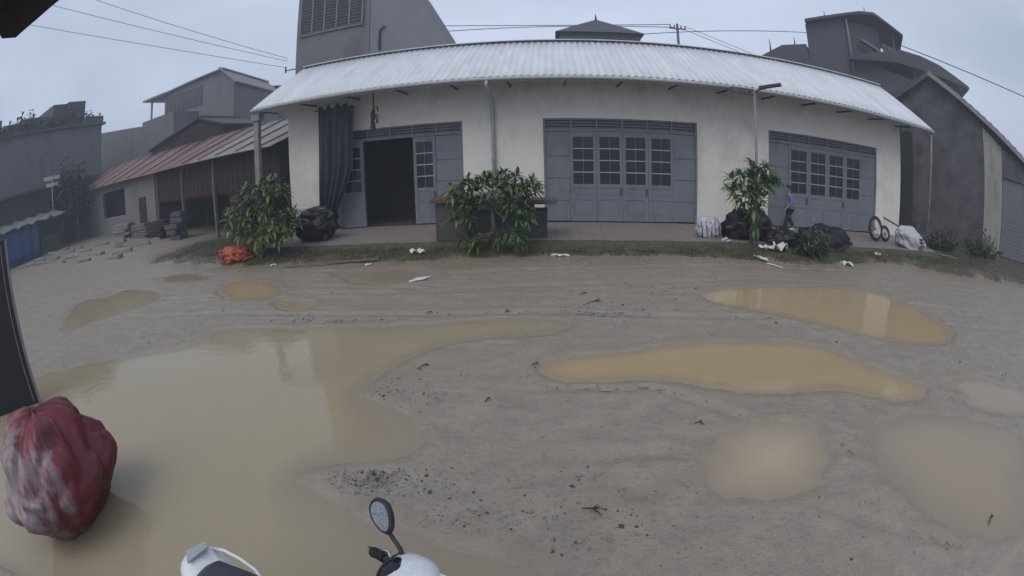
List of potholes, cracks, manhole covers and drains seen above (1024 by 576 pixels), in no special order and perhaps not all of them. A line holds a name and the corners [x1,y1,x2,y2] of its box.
pothole [848,402,1024,555]
pothole [691,282,962,350]
pothole [0,313,585,576]
pothole [929,370,1024,424]
pothole [676,410,849,518]
pothole [146,270,223,285]
pothole [207,277,294,303]
pothole [521,335,938,409]
pothole [262,295,327,315]
pothole [56,286,172,334]
